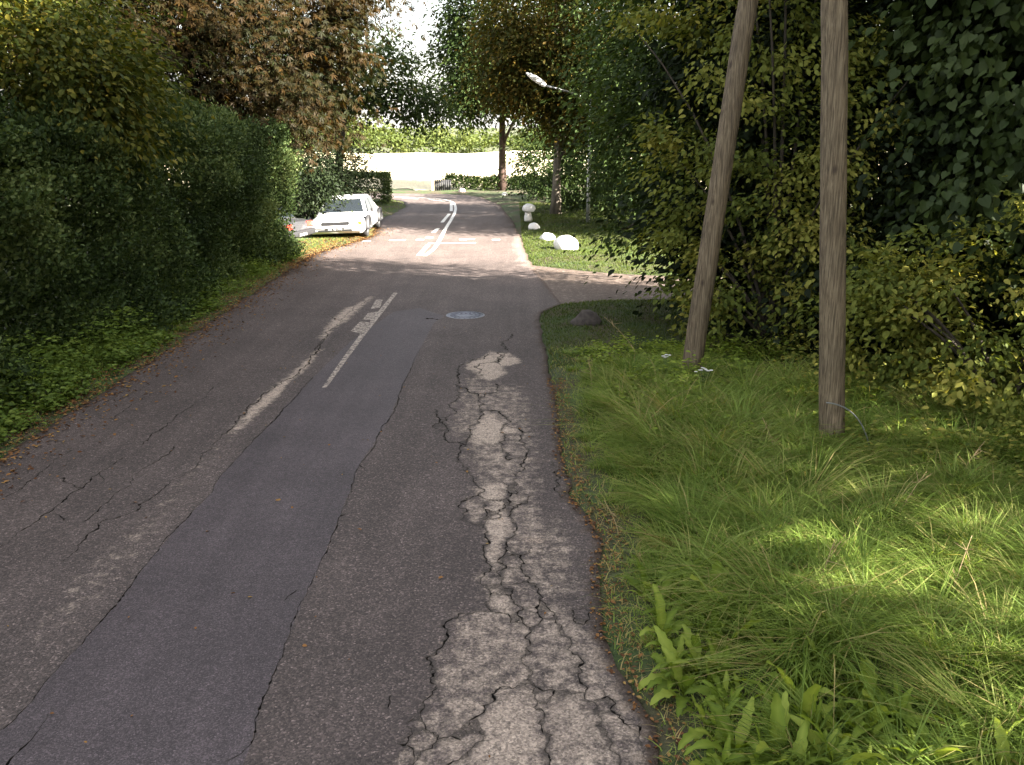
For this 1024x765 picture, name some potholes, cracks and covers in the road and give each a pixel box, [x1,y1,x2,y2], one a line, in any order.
manhole cover [446,311,485,319]
crack [0,299,369,559]
crack [399,335,642,765]
